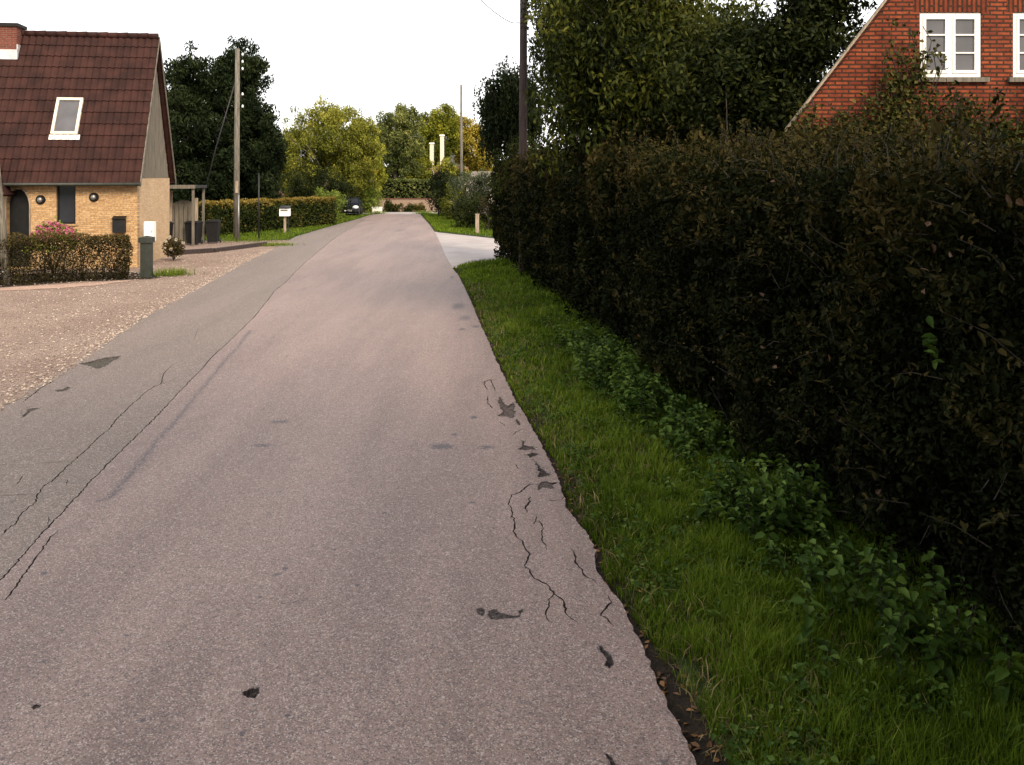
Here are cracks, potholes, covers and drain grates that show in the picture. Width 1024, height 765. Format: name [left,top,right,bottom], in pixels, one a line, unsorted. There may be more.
crack [483,379,520,434]
pothole [525,451,551,477]
pothole [488,609,524,620]
crack [508,465,612,626]
pothole [79,356,123,369]
pothole [599,646,614,669]
crack [4,364,174,600]
pothole [243,688,260,698]
pothole [497,397,521,418]
